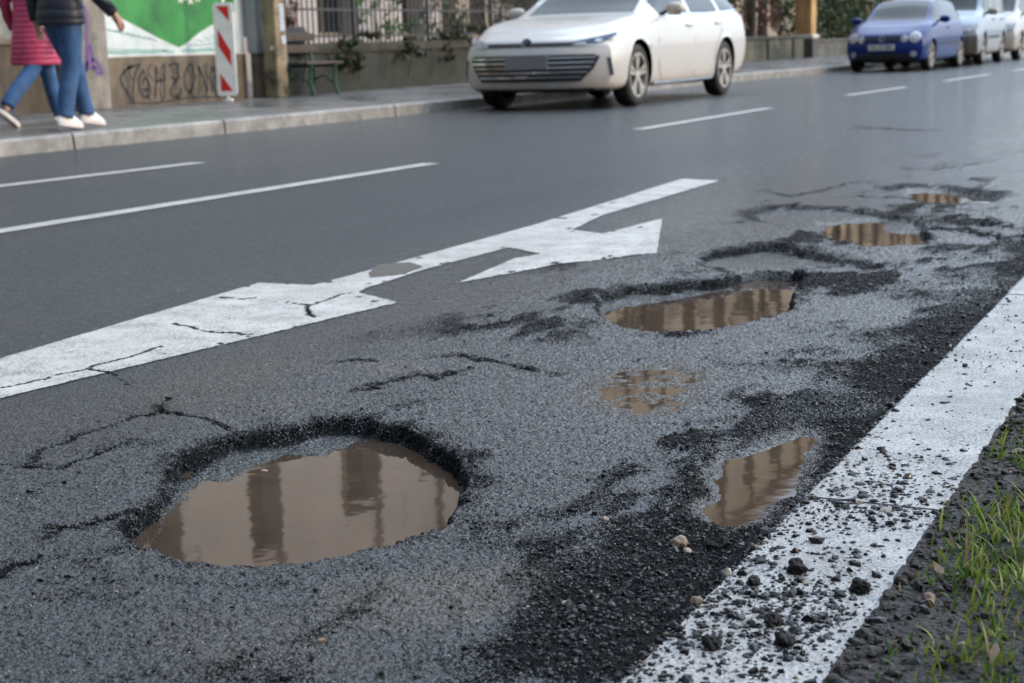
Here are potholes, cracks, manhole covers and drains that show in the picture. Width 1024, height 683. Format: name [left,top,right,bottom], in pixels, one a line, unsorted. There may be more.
pothole [106,414,483,570]
pothole [570,363,722,419]
crack [172,323,245,336]
crack [0,347,231,471]
crack [326,353,560,391]
pothole [684,426,832,530]
pothole [590,269,814,333]
pothole [740,204,943,247]
pothole [879,183,1009,205]
crack [287,293,350,318]
